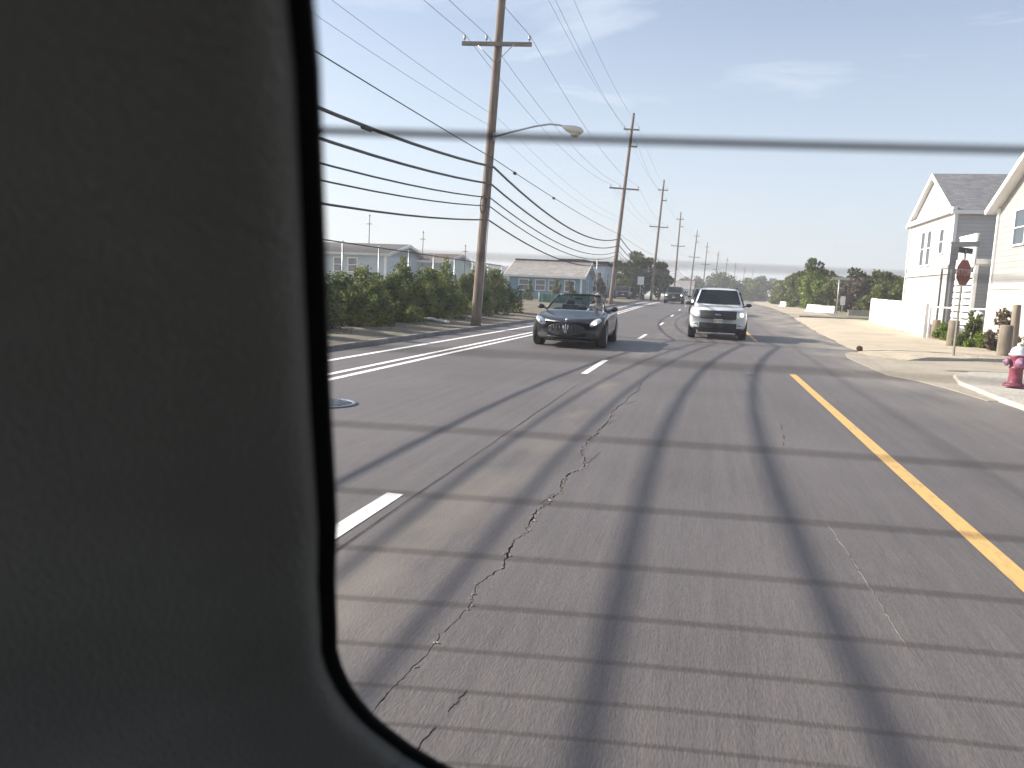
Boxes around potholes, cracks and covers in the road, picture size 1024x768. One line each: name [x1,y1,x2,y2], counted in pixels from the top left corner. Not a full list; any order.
crack [372,370,651,713]
crack [824,519,915,658]
manhole cover [332,397,358,409]
crack [418,690,467,749]
